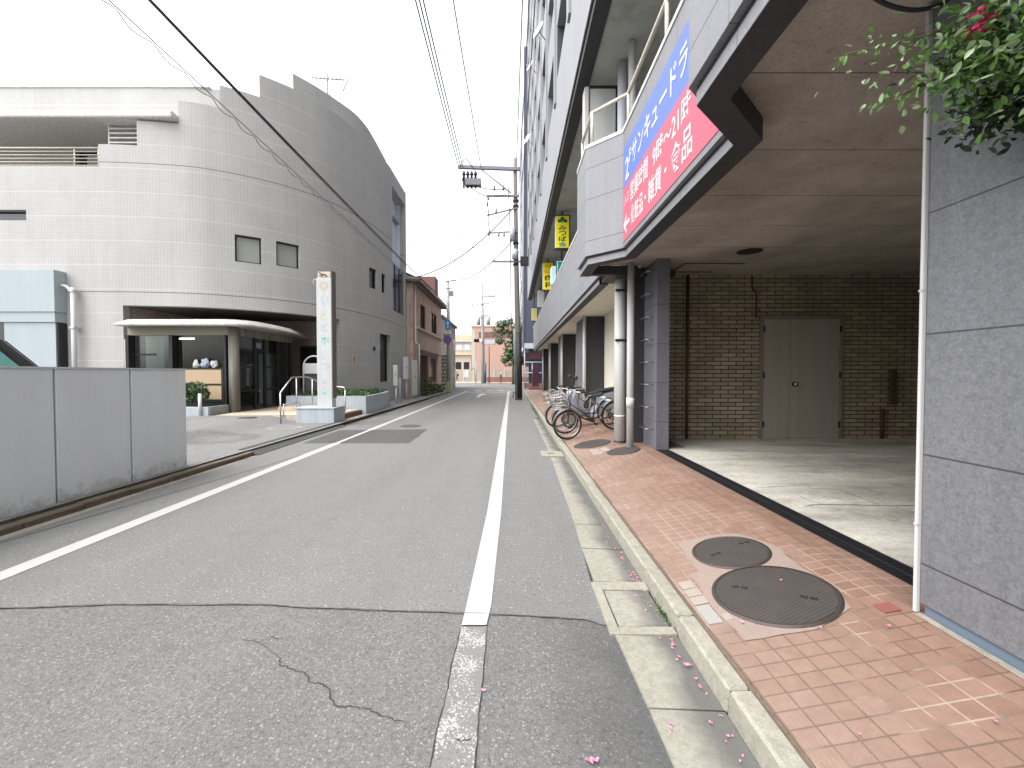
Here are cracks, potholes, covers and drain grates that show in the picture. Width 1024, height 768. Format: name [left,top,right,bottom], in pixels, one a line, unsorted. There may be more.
manhole cover [692,536,772,569]
manhole cover [574,439,611,448]
crack [243,636,408,723]
manhole cover [711,566,845,628]
manhole cover [607,446,641,455]
